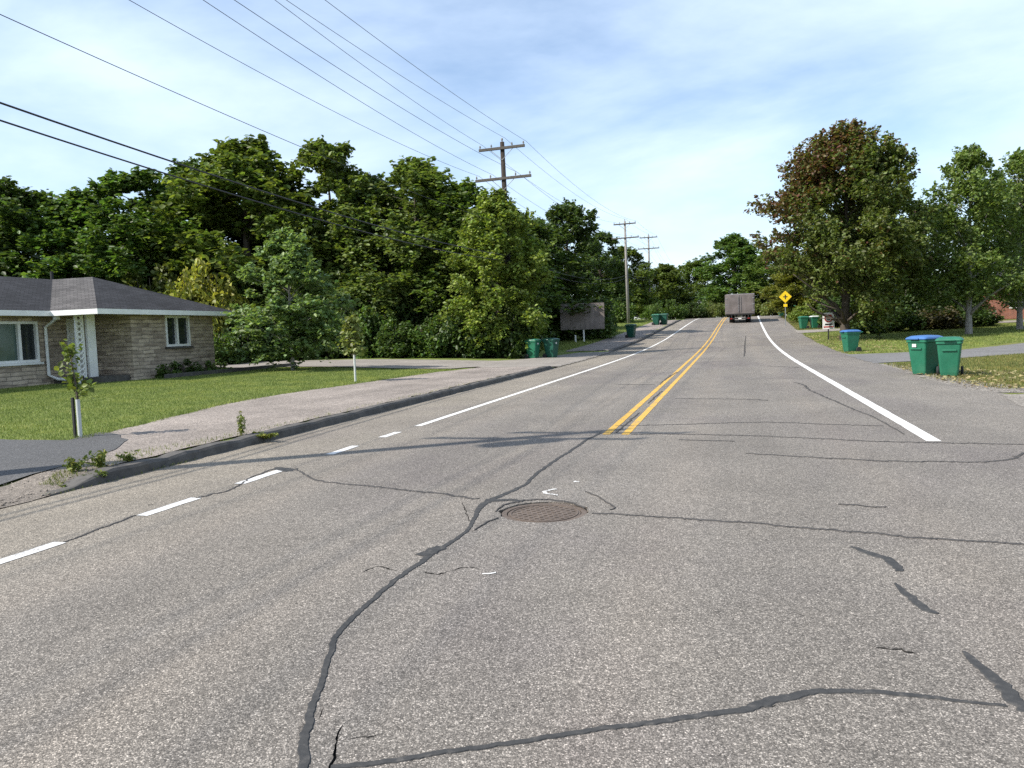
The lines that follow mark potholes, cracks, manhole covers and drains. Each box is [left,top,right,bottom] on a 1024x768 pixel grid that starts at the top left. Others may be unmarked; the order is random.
crack [328,725,378,768]
crack [870,646,916,654]
crack [63,515,136,542]
crack [615,366,1024,463]
crack [585,491,1024,545]
crack [363,566,480,575]
crack [198,467,278,498]
manhole cover [498,502,589,523]
